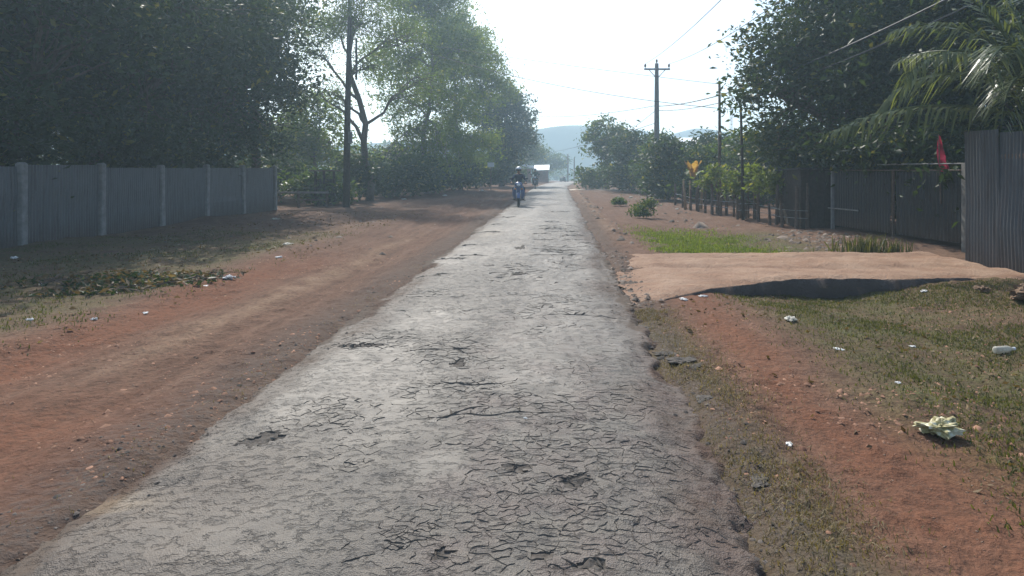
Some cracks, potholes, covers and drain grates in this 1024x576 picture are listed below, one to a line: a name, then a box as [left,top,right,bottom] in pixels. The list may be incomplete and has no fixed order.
pothole [501,464,538,473]
pothole [559,473,593,488]
pothole [570,557,614,572]
pothole [232,430,286,449]
crack [270,211,738,576]
